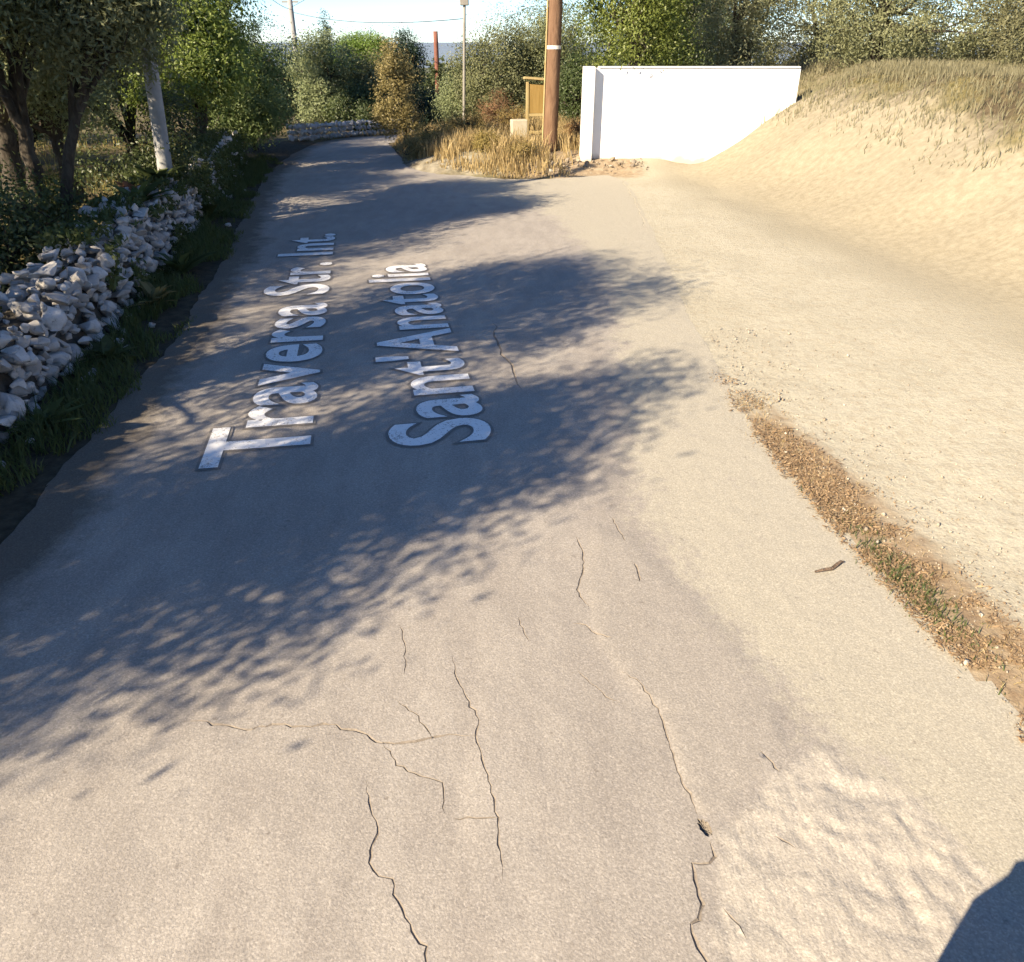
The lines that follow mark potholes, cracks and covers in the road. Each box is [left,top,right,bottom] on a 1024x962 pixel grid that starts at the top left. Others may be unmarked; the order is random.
crack [180,658,503,962]
crack [573,538,610,637]
crack [493,323,522,389]
crack [690,842,747,962]
